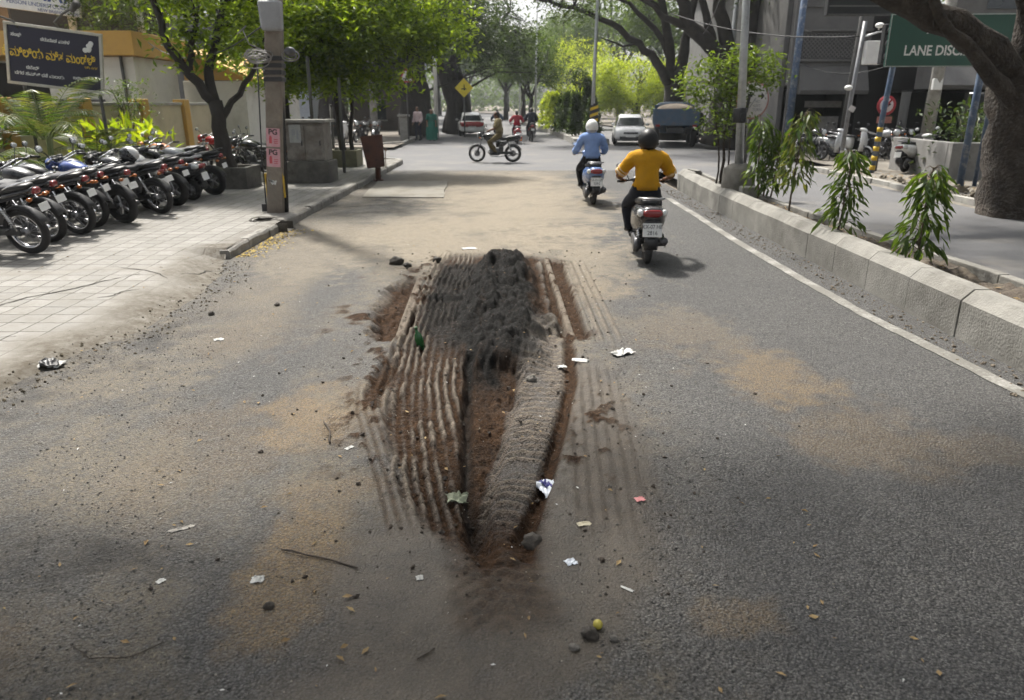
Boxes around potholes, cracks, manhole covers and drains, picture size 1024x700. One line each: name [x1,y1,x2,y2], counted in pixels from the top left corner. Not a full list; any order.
pothole [383,254,571,563]
pothole [541,258,589,344]
